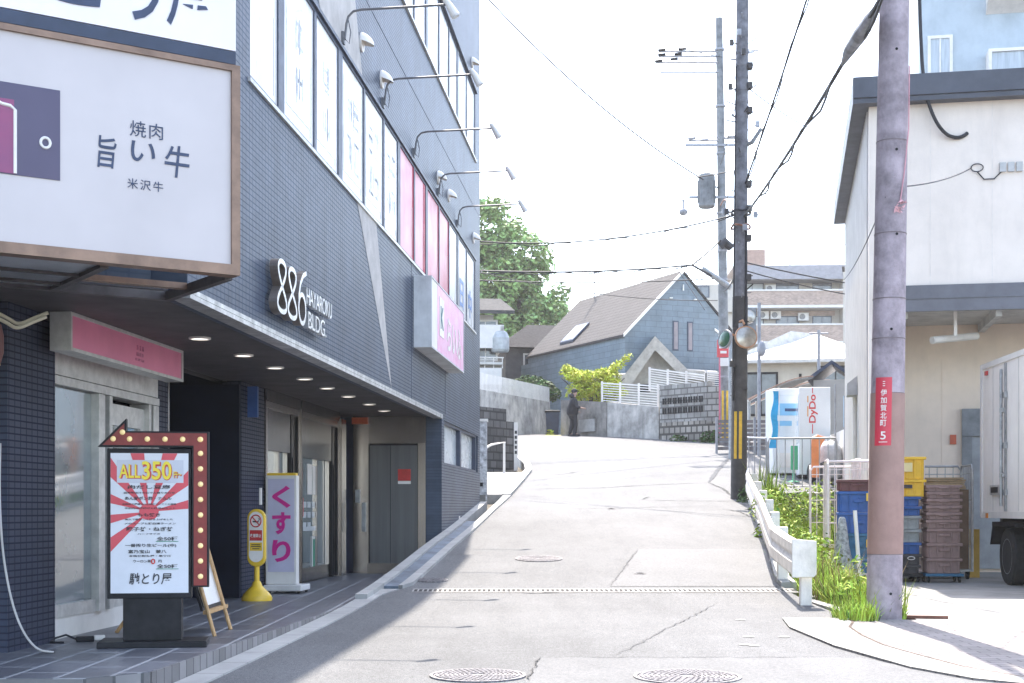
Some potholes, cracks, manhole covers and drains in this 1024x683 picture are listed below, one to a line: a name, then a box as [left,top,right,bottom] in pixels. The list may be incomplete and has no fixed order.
crack [612,605,712,656]
manhole cover [633,669,742,683]
manhole cover [429,668,526,683]
